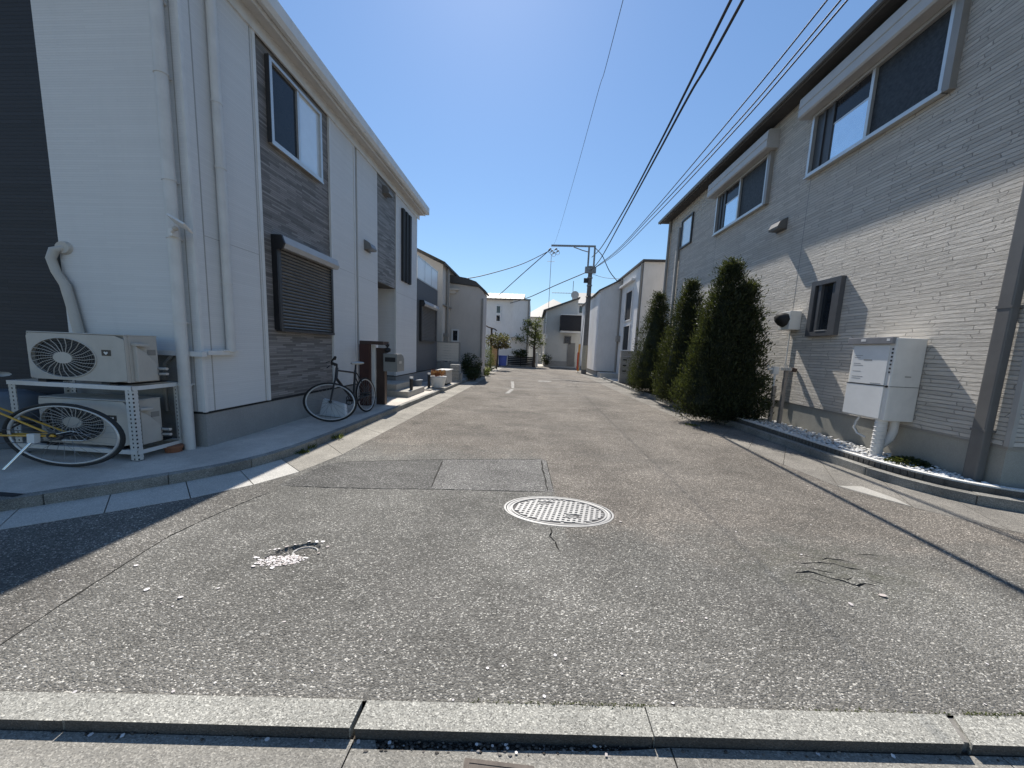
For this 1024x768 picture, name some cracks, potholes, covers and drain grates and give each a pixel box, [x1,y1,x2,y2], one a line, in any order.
manhole cover [504,496,614,527]
crack [796,554,890,587]
pothole [264,543,321,563]
